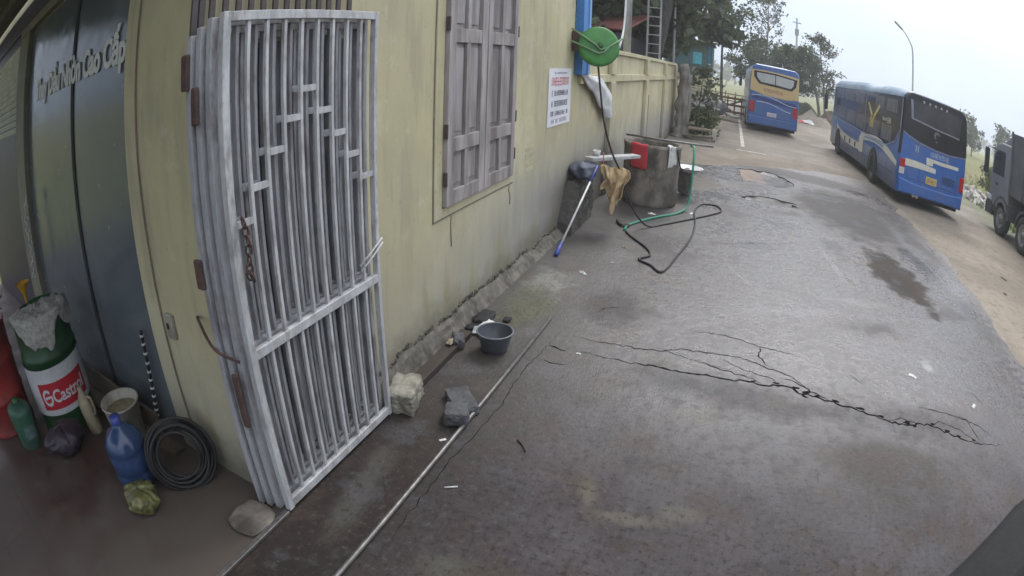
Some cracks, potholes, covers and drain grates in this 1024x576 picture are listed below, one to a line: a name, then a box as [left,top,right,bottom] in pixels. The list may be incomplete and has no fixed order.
pothole [738,169,794,188]
crack [581,331,999,446]
